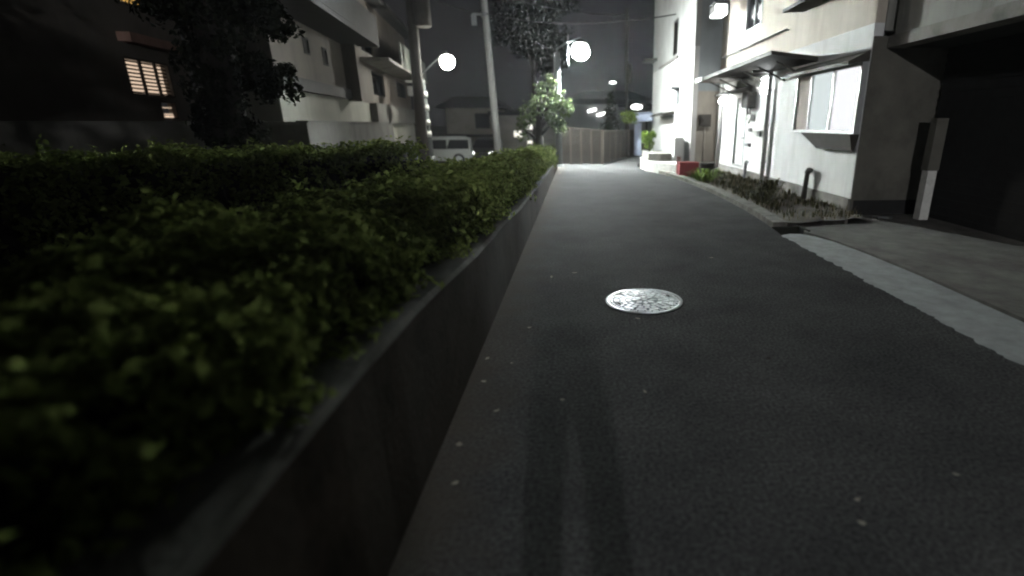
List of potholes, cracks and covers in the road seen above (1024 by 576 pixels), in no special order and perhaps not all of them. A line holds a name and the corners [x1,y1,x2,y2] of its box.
manhole cover [604,288,685,315]
